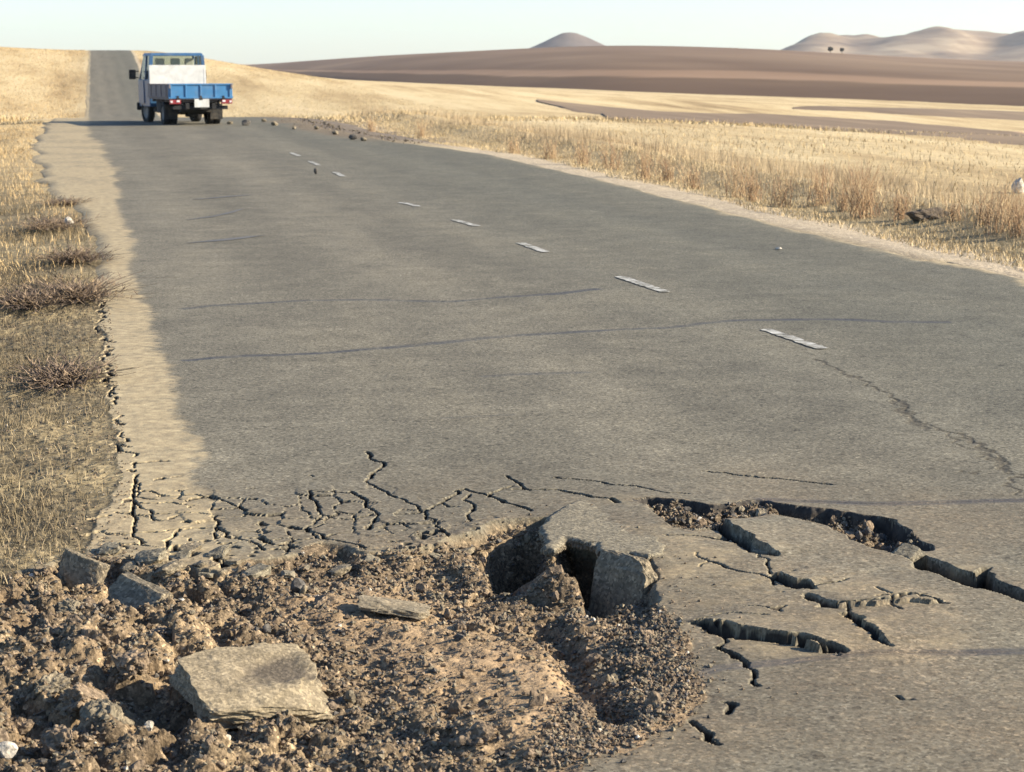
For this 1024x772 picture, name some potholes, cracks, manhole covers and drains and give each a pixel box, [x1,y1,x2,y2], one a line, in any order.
crack [80,297,690,568]
pothole [633,497,935,551]
crack [702,359,1024,495]
crack [663,519,1024,746]
pothole [0,516,708,772]
